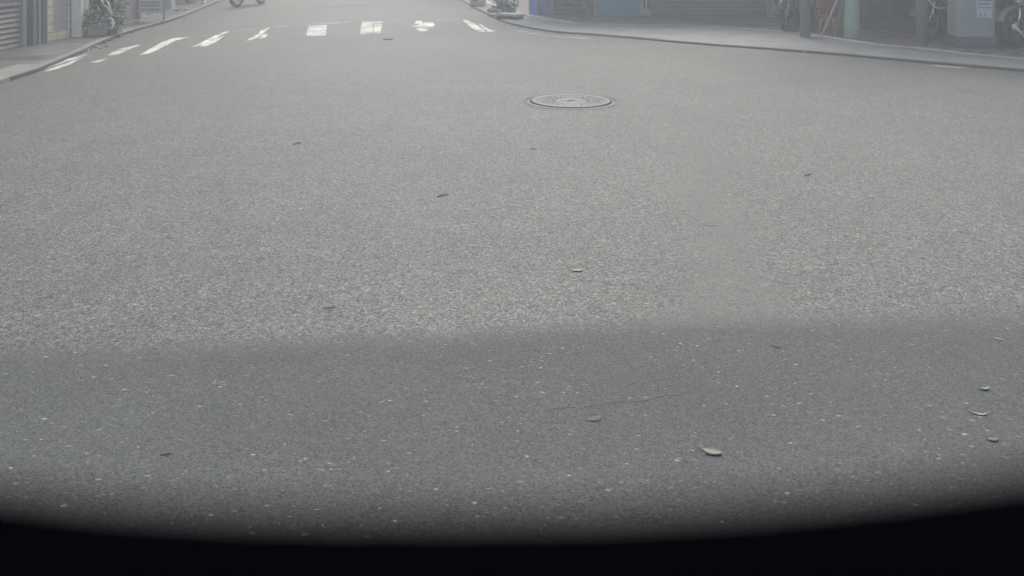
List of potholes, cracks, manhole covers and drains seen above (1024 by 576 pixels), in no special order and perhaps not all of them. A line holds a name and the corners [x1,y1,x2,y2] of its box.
manhole cover [523,93,622,110]
